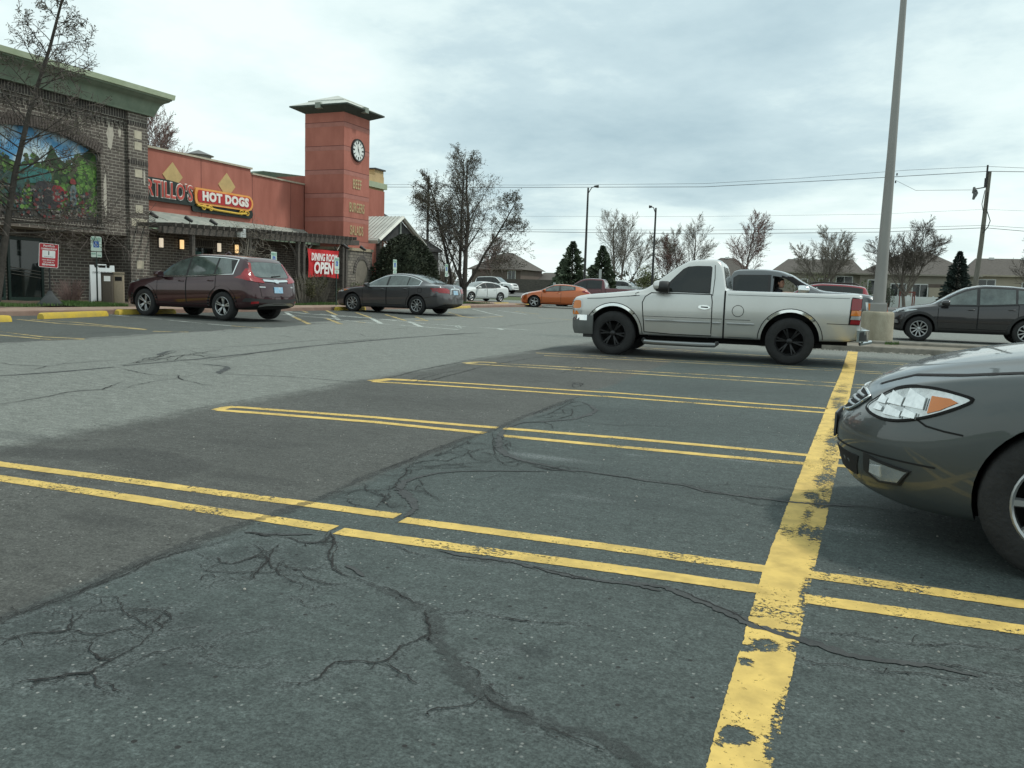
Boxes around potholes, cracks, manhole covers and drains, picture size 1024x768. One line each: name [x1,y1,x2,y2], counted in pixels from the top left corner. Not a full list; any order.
crack [3,326,364,402]
crack [1,532,635,753]
crack [338,366,935,517]
crack [796,628,1024,651]
